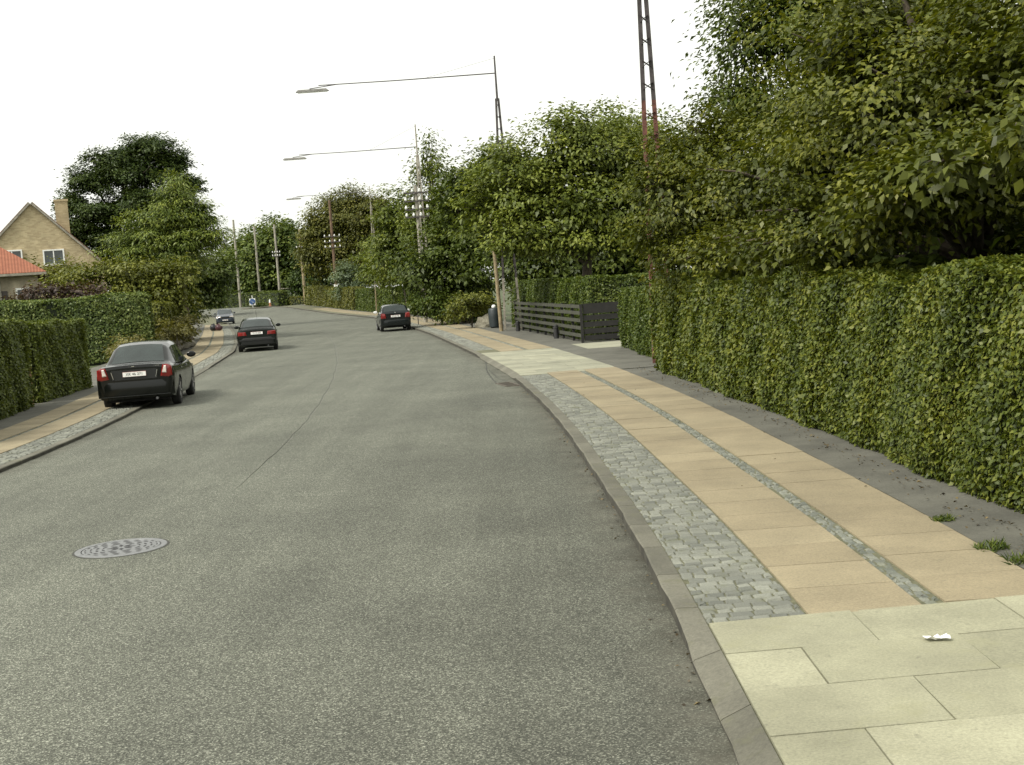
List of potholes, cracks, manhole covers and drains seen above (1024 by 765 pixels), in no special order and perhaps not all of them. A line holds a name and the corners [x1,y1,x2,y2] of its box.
manhole cover [72,538,170,559]
